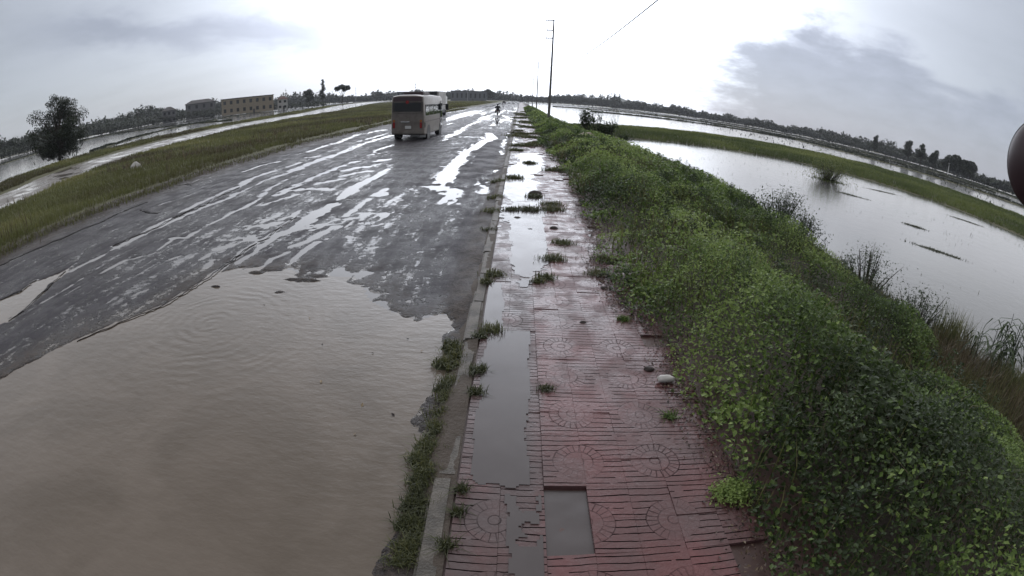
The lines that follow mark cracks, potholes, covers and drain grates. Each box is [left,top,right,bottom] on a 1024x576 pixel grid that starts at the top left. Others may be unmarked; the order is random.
pothole [0,264,461,576]
